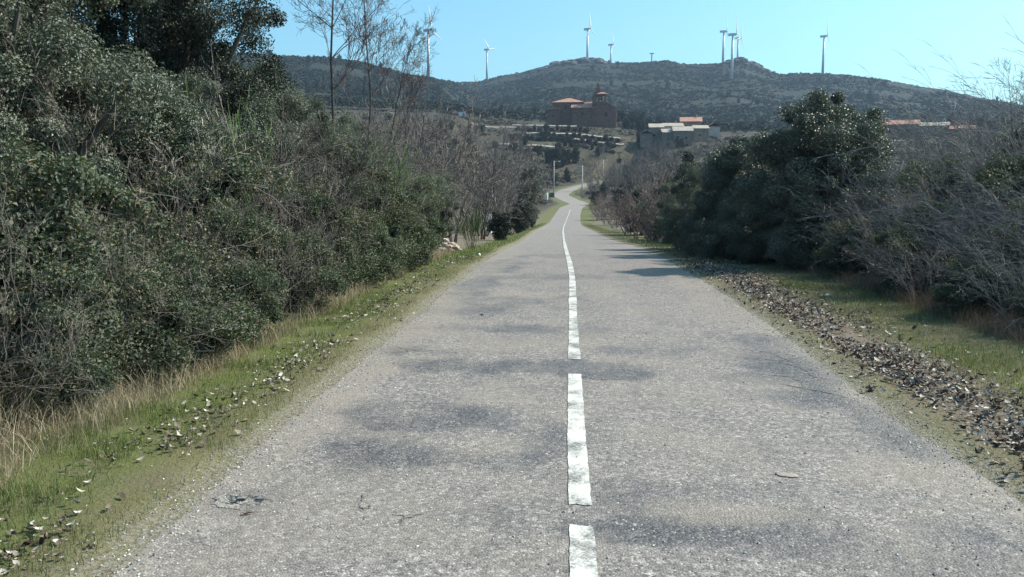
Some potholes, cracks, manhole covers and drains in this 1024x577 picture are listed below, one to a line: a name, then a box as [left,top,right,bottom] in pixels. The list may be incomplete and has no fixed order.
crack [359,494,424,522]
pothole [210,494,275,510]
crack [740,348,850,398]
